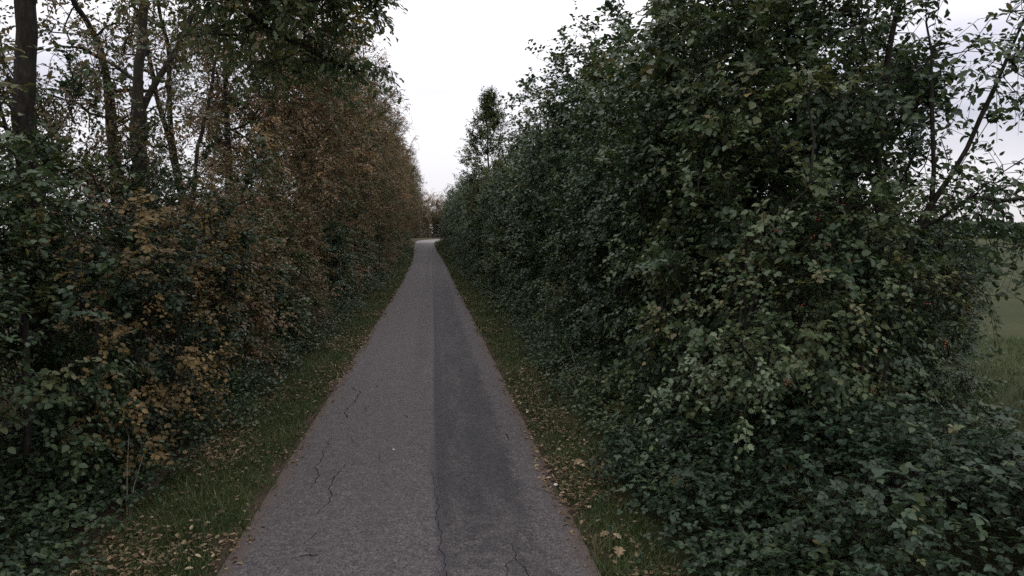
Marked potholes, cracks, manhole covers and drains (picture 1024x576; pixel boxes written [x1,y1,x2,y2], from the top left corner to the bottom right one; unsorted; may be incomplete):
crack [310,438,353,511]
